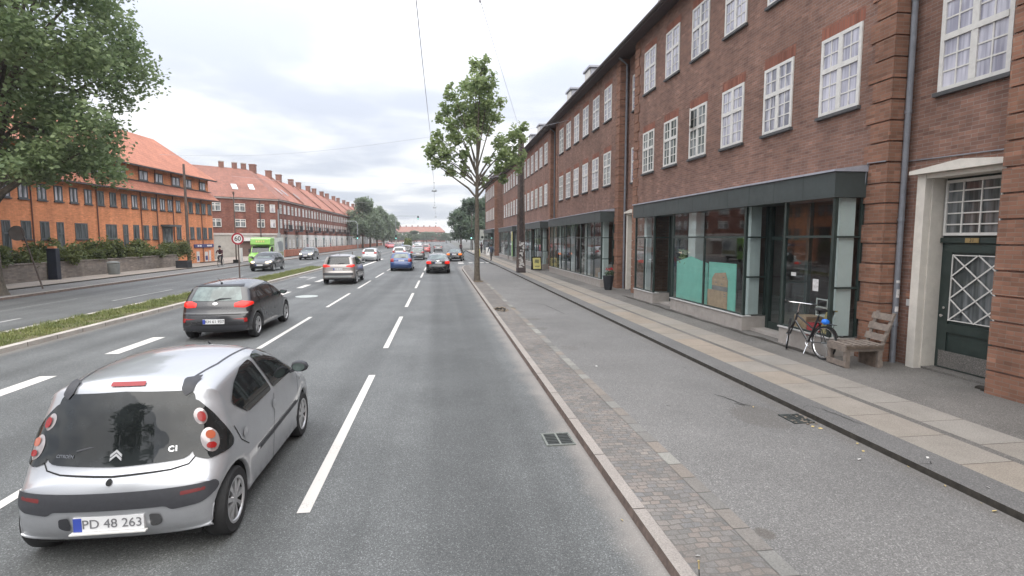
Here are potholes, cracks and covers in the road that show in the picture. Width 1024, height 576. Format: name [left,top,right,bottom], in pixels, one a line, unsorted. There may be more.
drain grate [778,413,818,424]
drain grate [541,432,576,446]
